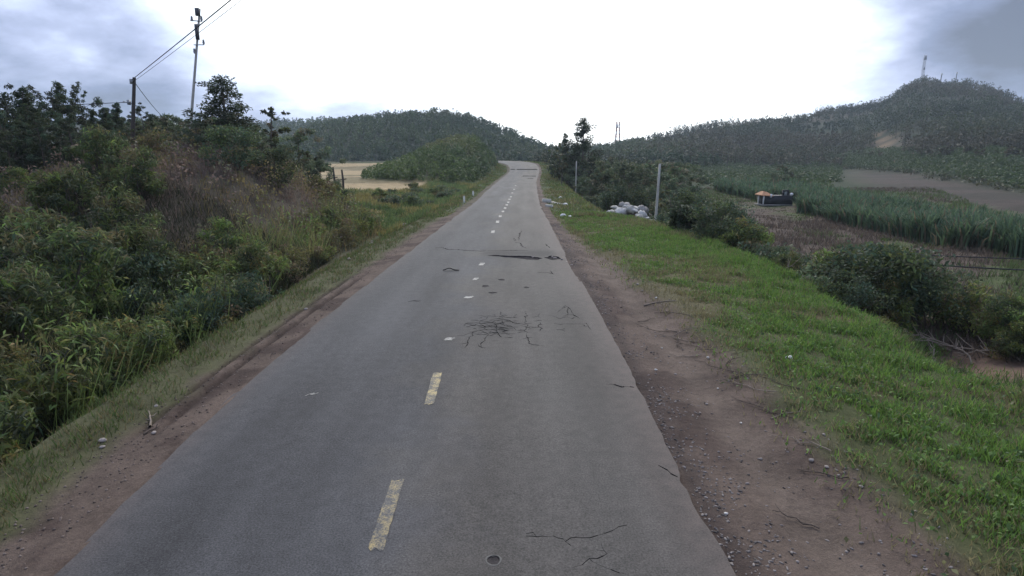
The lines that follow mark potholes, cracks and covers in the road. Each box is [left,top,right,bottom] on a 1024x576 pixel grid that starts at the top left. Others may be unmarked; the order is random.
crack [526,525,629,575]
crack [463,306,587,348]
